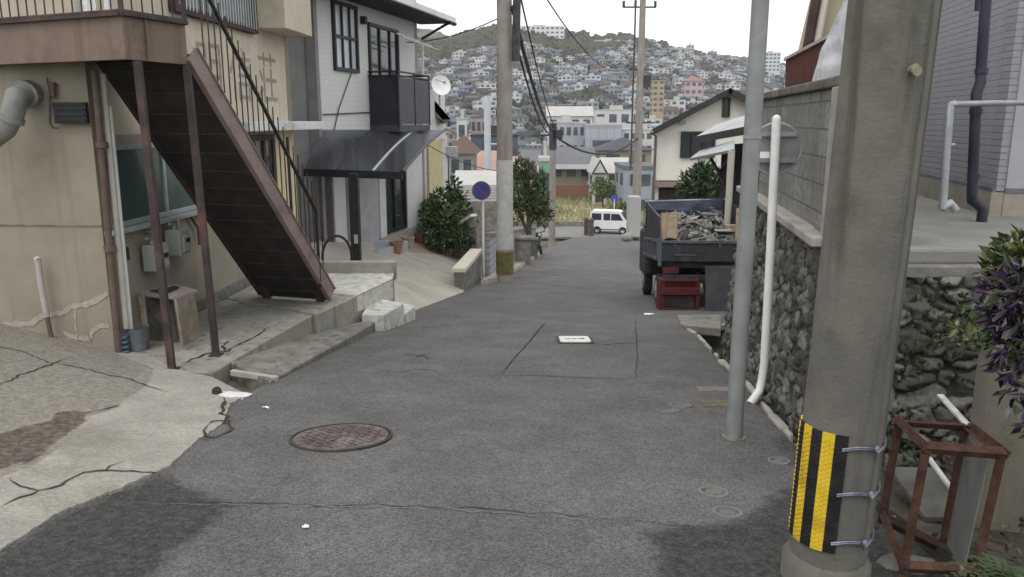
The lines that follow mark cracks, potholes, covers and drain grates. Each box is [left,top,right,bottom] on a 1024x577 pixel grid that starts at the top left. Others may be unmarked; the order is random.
utility cover [767,456,790,466]
manhole cover [289,423,393,452]
utility cover [712,505,743,518]
utility cover [698,486,729,498]
crack [198,397,234,440]
crack [183,328,267,363]
crack [0,346,168,392]
crack [143,500,676,526]
utility cover [555,336,595,344]
crack [4,461,163,505]
